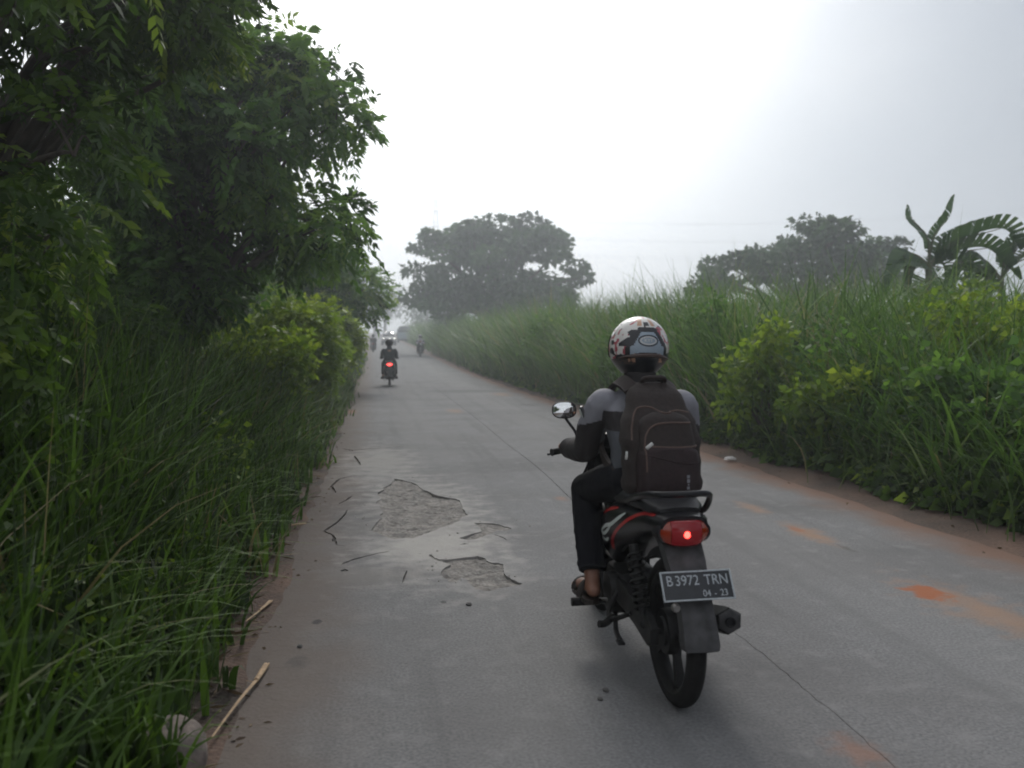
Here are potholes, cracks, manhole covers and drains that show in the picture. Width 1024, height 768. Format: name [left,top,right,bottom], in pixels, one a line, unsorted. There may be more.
pothole [461,523,511,540]
pothole [429,554,521,591]
pothole [372,479,467,539]
crack [324,446,401,564]
